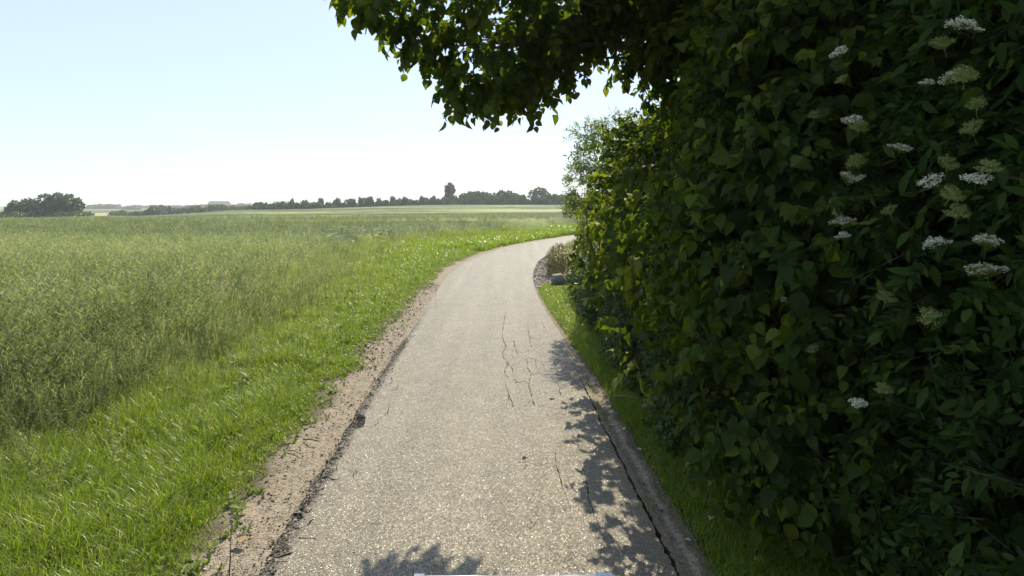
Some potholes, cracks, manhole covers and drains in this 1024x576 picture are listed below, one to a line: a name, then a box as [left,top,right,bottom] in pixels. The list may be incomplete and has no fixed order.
pothole [348,414,366,429]
crack [502,317,679,576]
